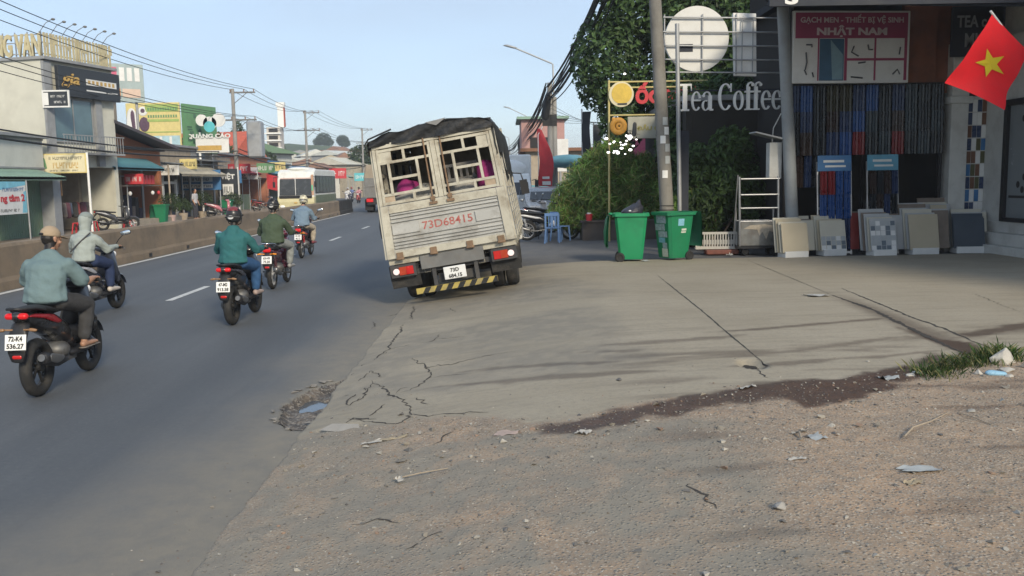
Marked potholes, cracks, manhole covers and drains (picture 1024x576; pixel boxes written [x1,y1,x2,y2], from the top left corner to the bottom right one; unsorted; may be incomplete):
crack [346,308,512,424]
crack [686,484,717,508]
pothole [278,380,344,431]
